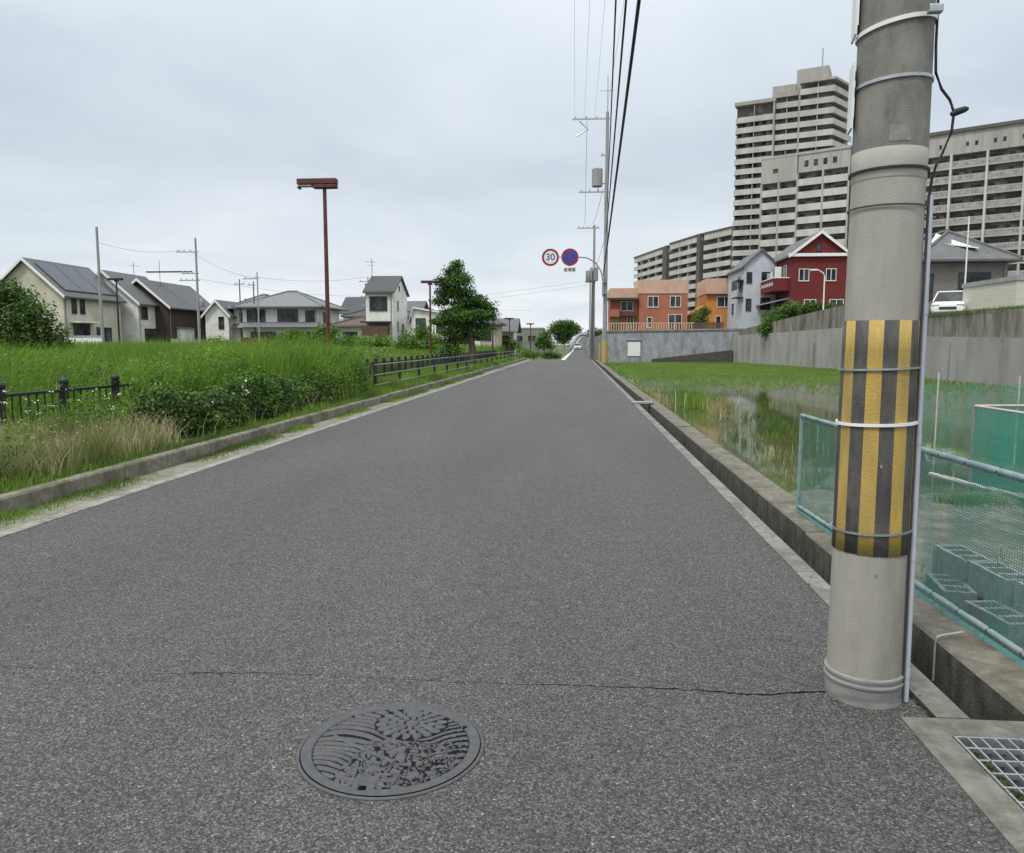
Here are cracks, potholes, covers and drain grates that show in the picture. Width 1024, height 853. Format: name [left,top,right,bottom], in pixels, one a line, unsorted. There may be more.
drain grate [953,736,1024,811]
manhole cover [296,703,485,801]
crack [3,666,826,696]
